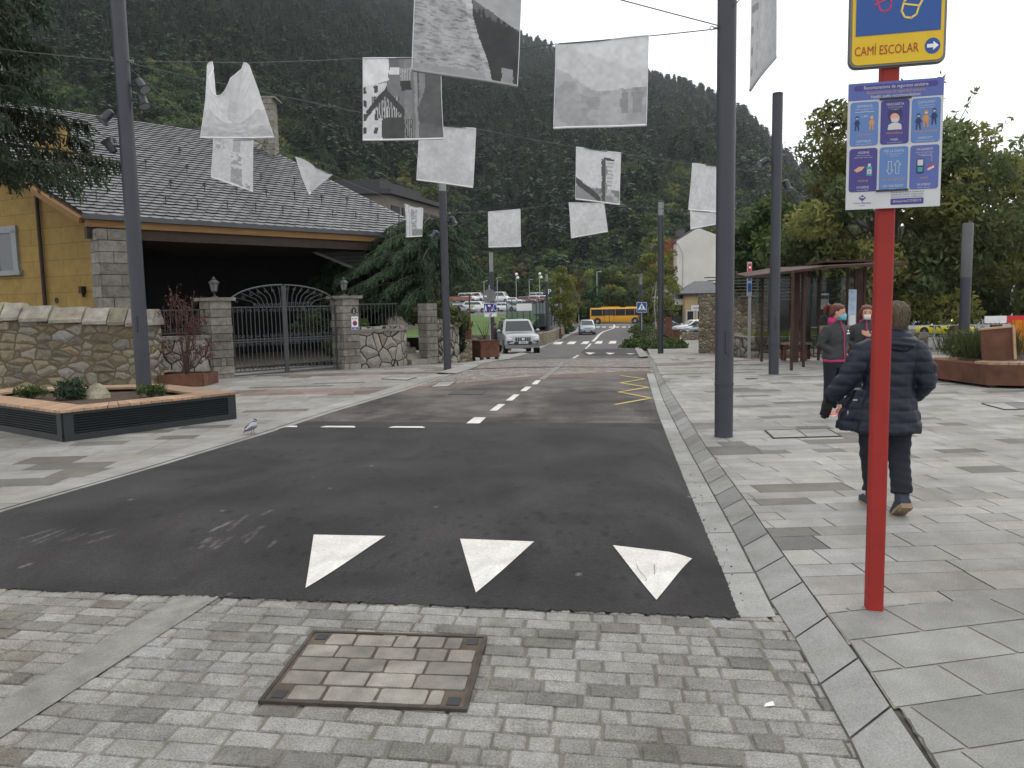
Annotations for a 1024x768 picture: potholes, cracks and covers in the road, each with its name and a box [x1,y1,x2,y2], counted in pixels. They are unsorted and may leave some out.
manhole cover [258,630,487,713]
manhole cover [764,428,842,439]
manhole cover [981,402,1024,410]
